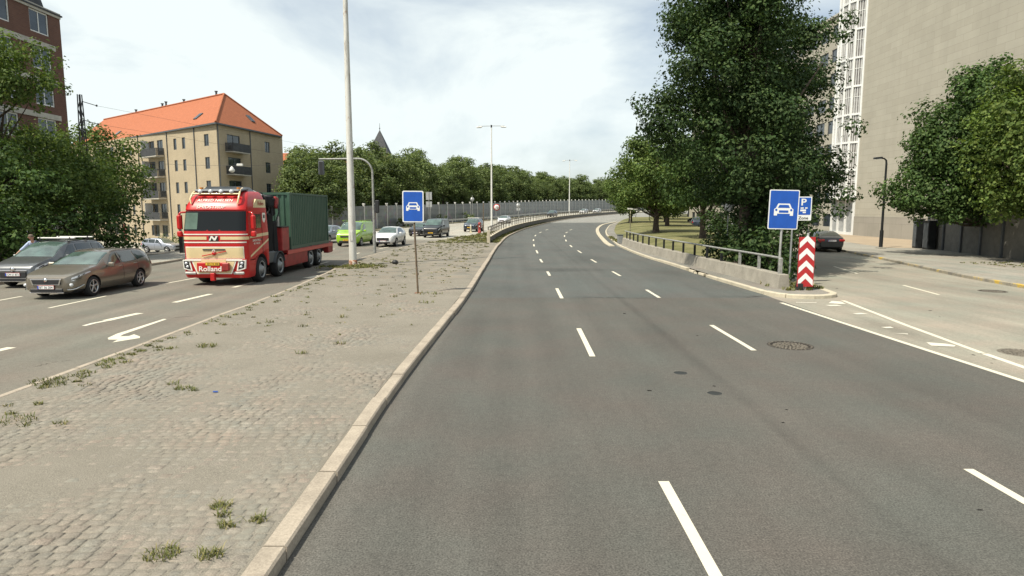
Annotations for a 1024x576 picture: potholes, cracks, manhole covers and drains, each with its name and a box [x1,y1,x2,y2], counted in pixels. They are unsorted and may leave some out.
manhole cover [767,341,814,350]
manhole cover [997,348,1024,357]
